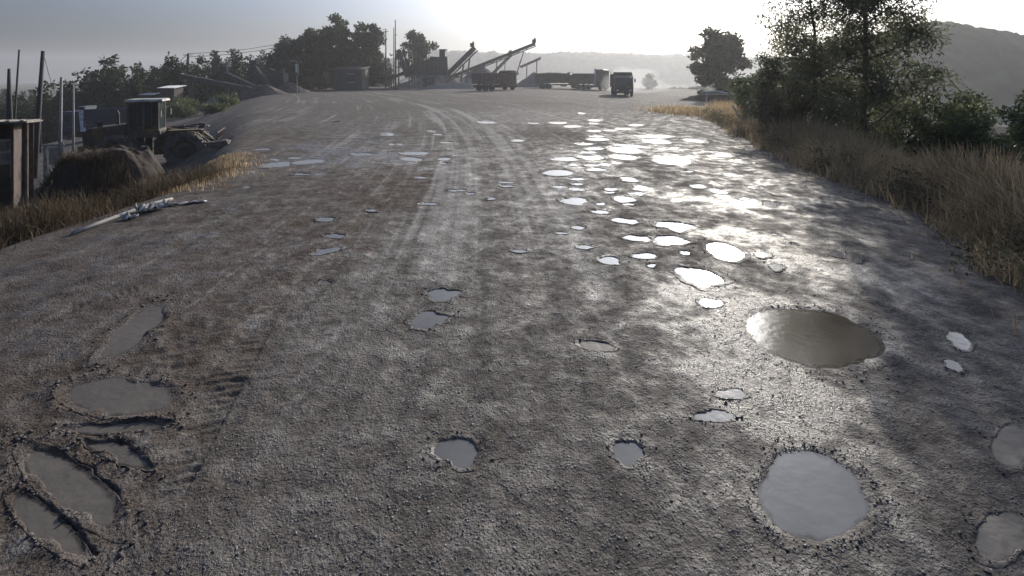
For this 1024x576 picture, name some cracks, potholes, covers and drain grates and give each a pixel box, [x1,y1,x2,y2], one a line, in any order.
pothole [739,438,891,558]
pothole [2,486,94,570]
pothole [941,330,976,353]
pothole [404,308,455,332]
pothole [573,339,620,352]
pothole [688,407,741,423]
pothole [966,506,1024,569]
pothole [666,263,731,292]
pothole [985,419,1024,474]
pothole [425,433,486,473]
pothole [12,439,138,544]
pothole [421,286,466,303]
